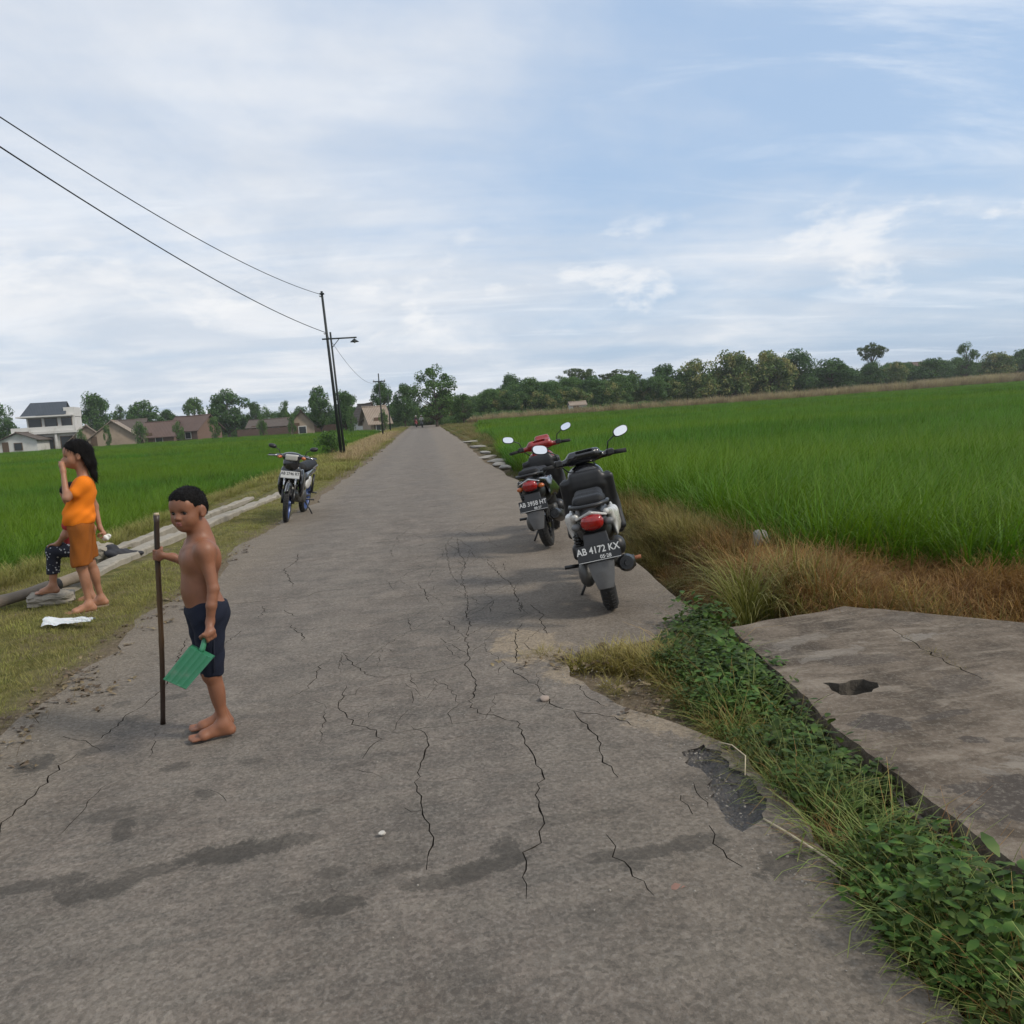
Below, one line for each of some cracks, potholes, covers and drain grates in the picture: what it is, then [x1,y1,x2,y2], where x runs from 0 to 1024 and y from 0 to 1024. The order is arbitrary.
crack [606,834,651,892]
pothole [824,679,879,695]
crack [233,527,637,897]
crack [680,782,743,867]
crack [0,640,186,833]
